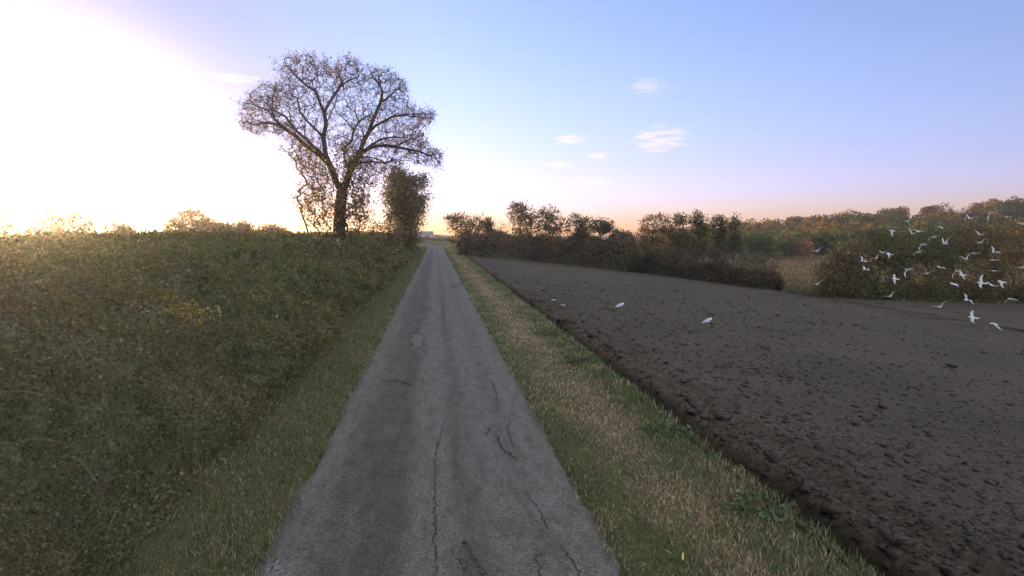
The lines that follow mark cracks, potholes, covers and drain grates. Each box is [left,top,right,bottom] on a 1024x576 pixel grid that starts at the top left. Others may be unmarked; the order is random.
pothole [454,540,487,576]
crack [526,493,581,576]
crack [432,426,444,576]
crack [485,381,522,461]
